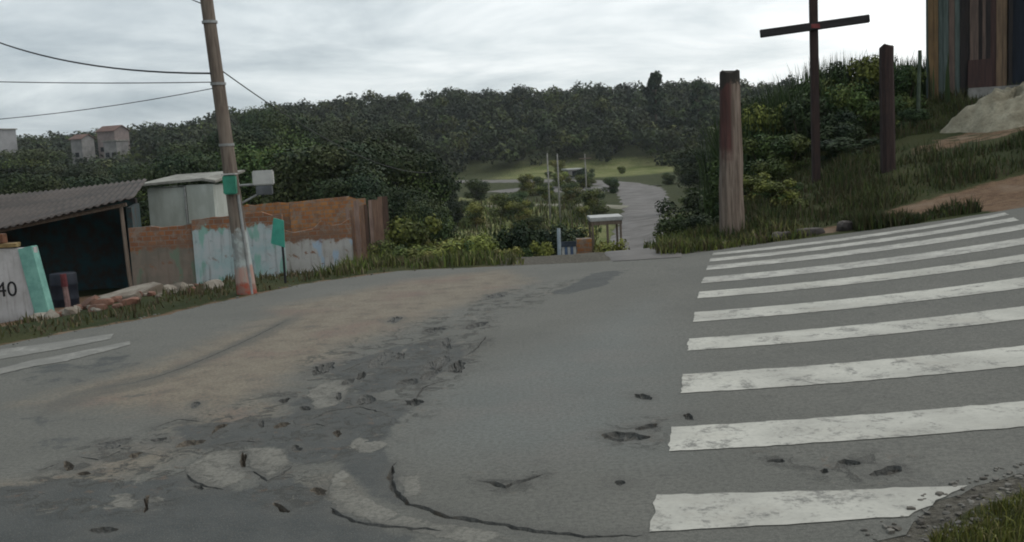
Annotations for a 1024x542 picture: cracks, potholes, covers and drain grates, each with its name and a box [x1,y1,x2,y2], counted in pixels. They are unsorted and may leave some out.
crack [37,294,504,513]
pothole [601,431,650,442]
pothole [869,465,902,477]
crack [330,463,642,538]
